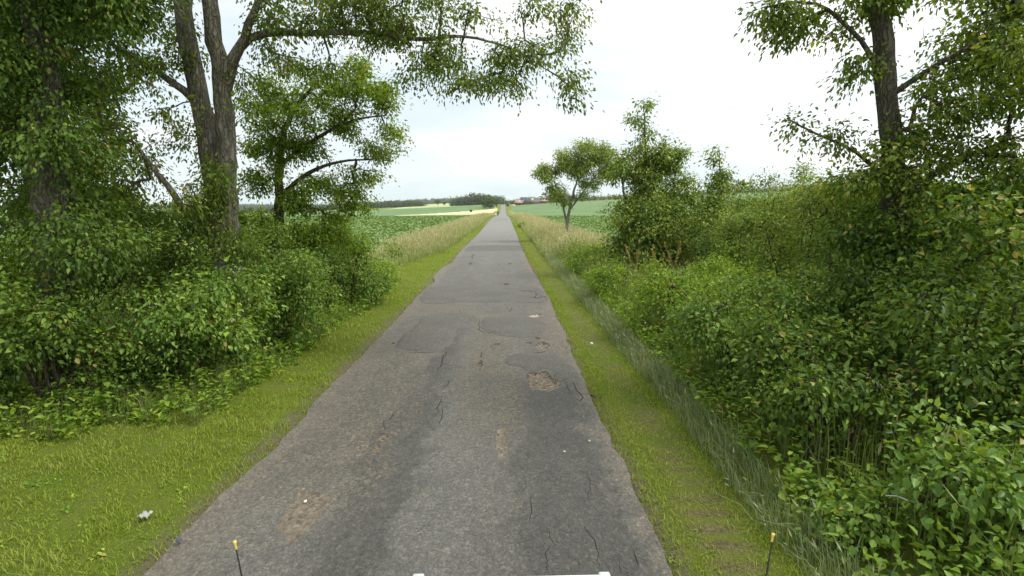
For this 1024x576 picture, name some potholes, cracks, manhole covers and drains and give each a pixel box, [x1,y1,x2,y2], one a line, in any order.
crack [428,351,459,427]
crack [540,526,639,573]
pothole [496,427,508,461]
pothole [526,371,562,392]
pothole [276,488,331,545]
